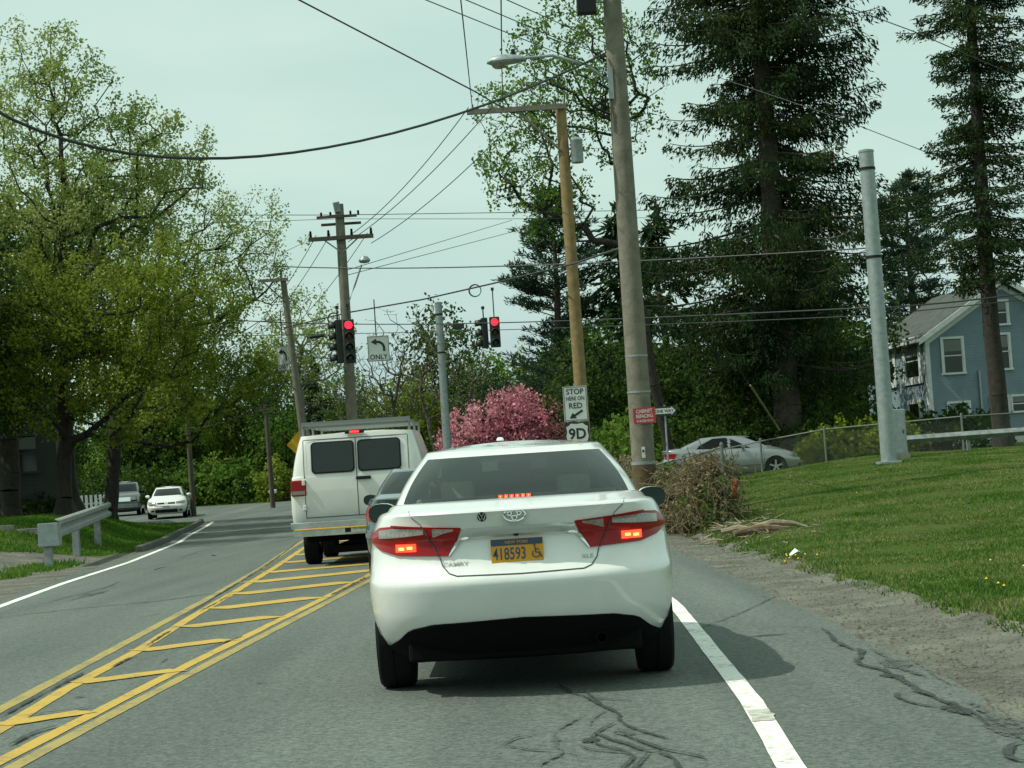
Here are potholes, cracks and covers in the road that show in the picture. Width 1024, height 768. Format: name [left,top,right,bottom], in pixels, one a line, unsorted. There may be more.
crack [503,690,704,768]
crack [953,703,1024,742]
